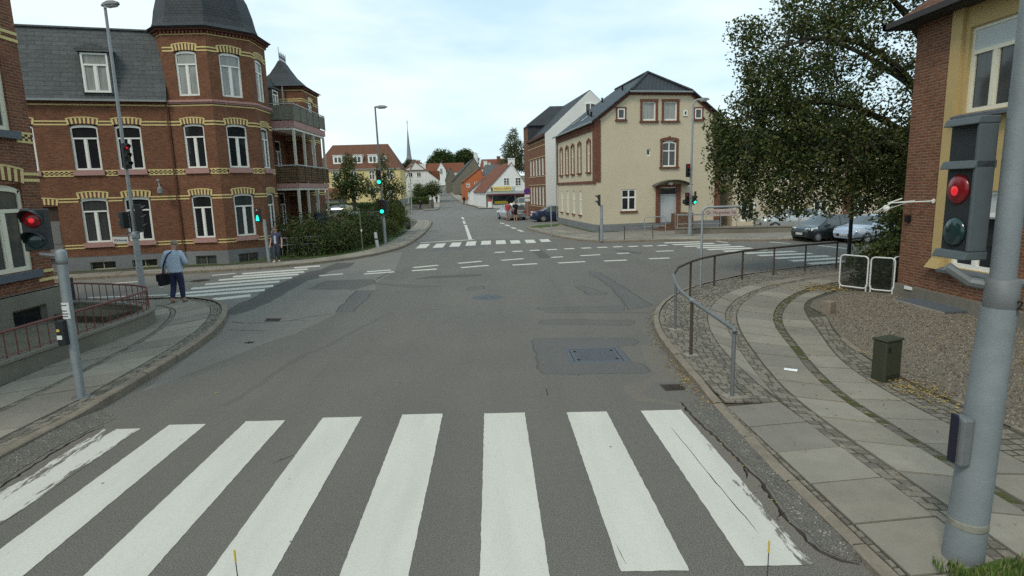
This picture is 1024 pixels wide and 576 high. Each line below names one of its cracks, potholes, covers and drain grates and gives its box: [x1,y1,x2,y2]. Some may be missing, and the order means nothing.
crack [673,402,861,565]
manhole cover [564,347,630,364]
